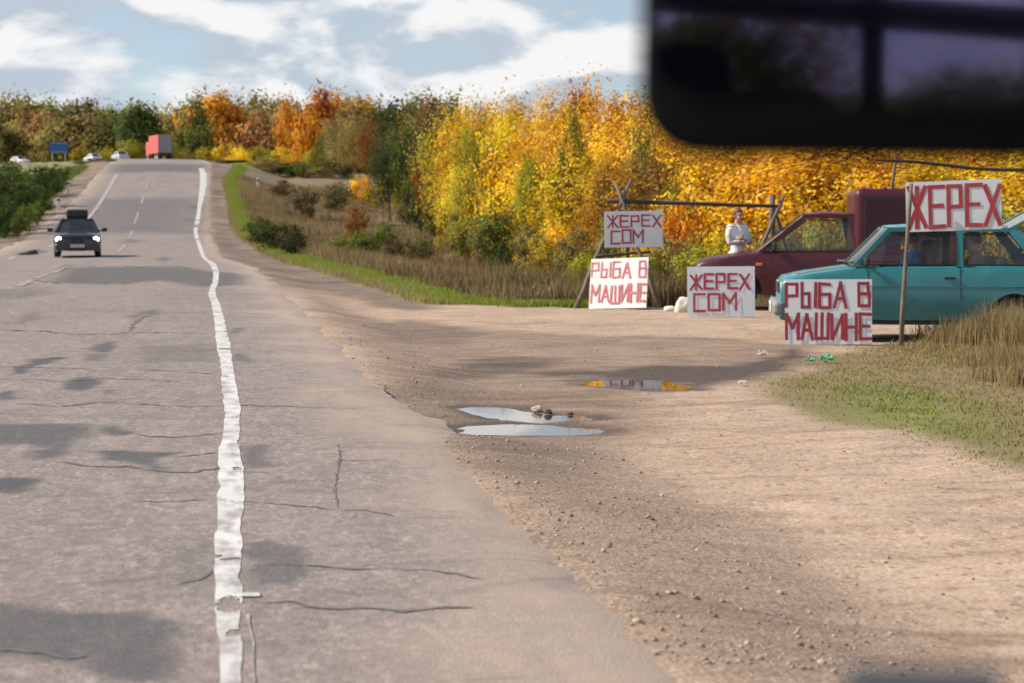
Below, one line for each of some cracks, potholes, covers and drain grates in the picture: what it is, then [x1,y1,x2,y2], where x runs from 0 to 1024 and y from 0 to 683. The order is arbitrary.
crack [18,312,192,335]
crack [151,444,395,516]
crack [257,600,472,612]
crack [61,452,271,474]
crack [264,564,483,579]
crack [0,648,87,659]
crack [3,366,218,382]
